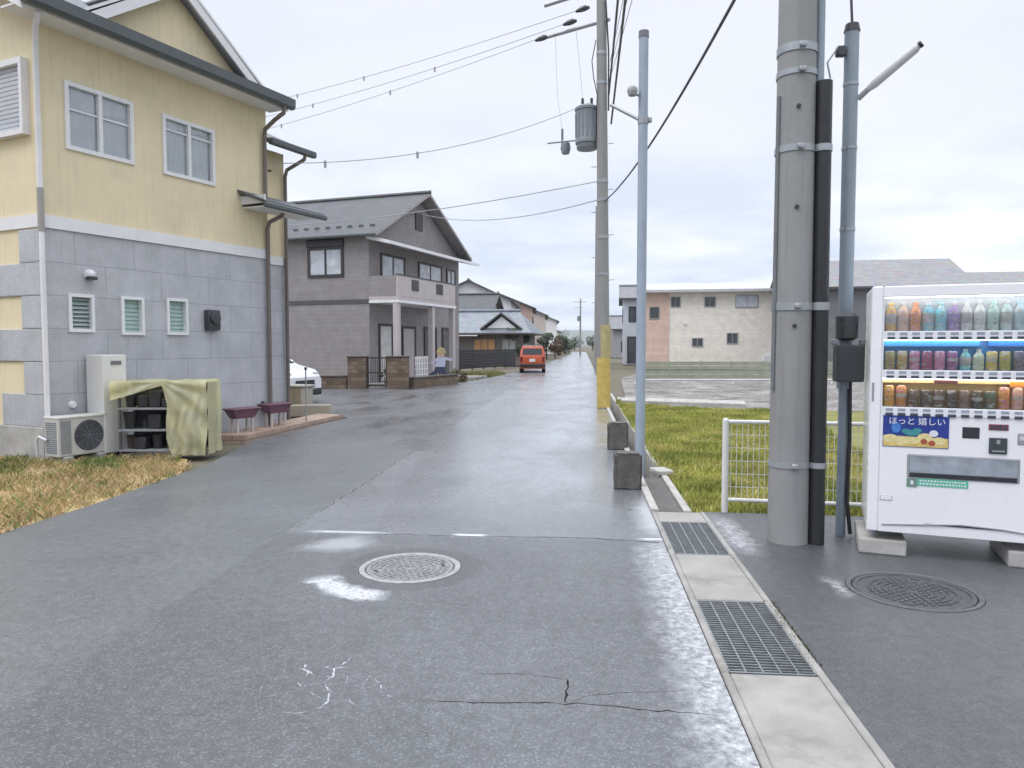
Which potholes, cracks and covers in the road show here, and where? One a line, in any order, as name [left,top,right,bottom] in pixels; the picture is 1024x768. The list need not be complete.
crack [419,674,716,716]
drain grate [696,600,817,677]
drain grate [660,522,730,555]
manhole cover [359,553,461,584]
manhole cover [845,571,985,613]
crack [259,656,395,714]
